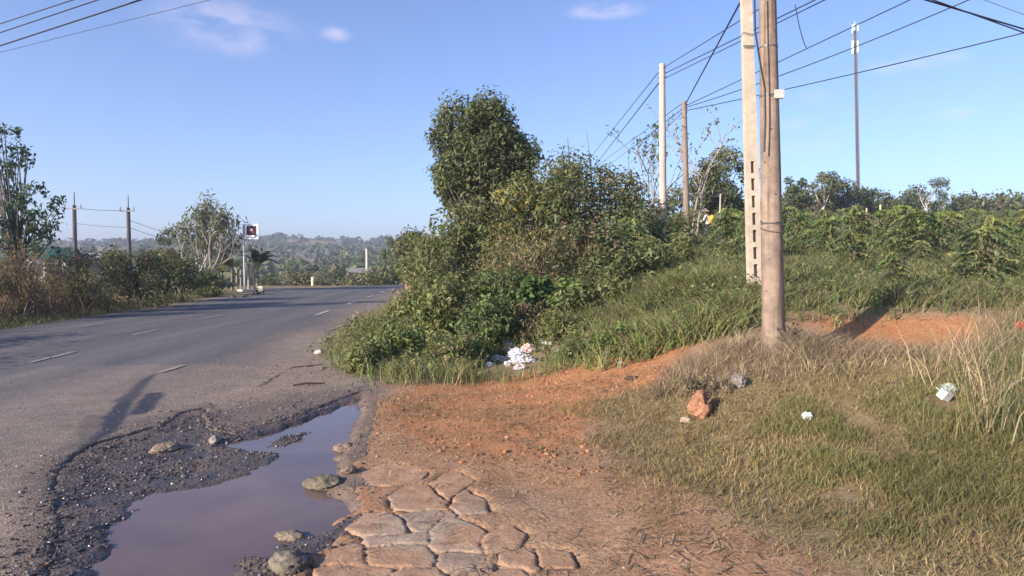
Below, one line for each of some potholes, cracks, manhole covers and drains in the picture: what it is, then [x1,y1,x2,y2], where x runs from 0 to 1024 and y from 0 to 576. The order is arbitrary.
pothole [47,392,379,576]
